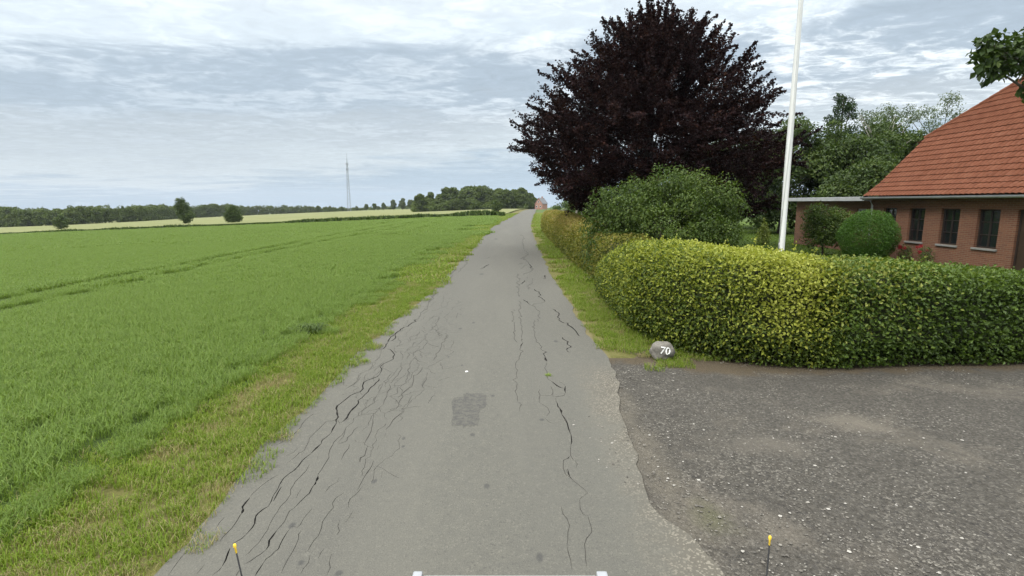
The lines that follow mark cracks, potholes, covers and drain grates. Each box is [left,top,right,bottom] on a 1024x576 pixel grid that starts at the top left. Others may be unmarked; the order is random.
crack [511,235,592,568]
crack [169,256,469,576]
